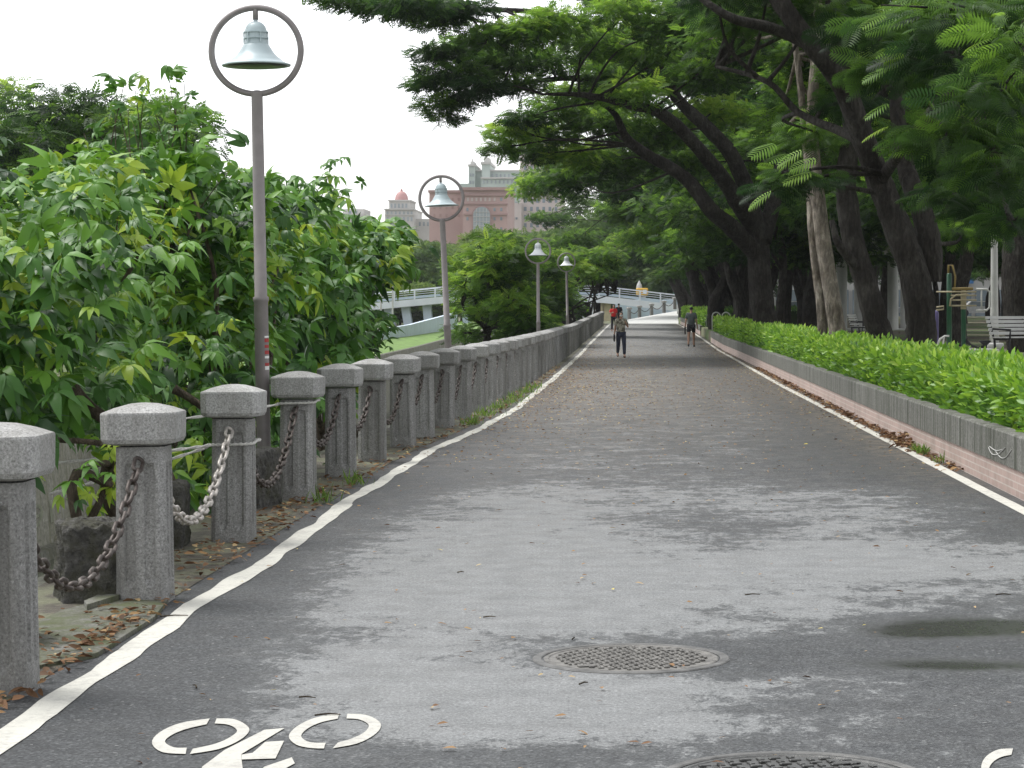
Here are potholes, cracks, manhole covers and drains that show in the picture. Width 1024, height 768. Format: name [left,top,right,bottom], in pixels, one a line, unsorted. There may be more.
manhole cover [533,643,730,674]
manhole cover [667,751,915,768]
